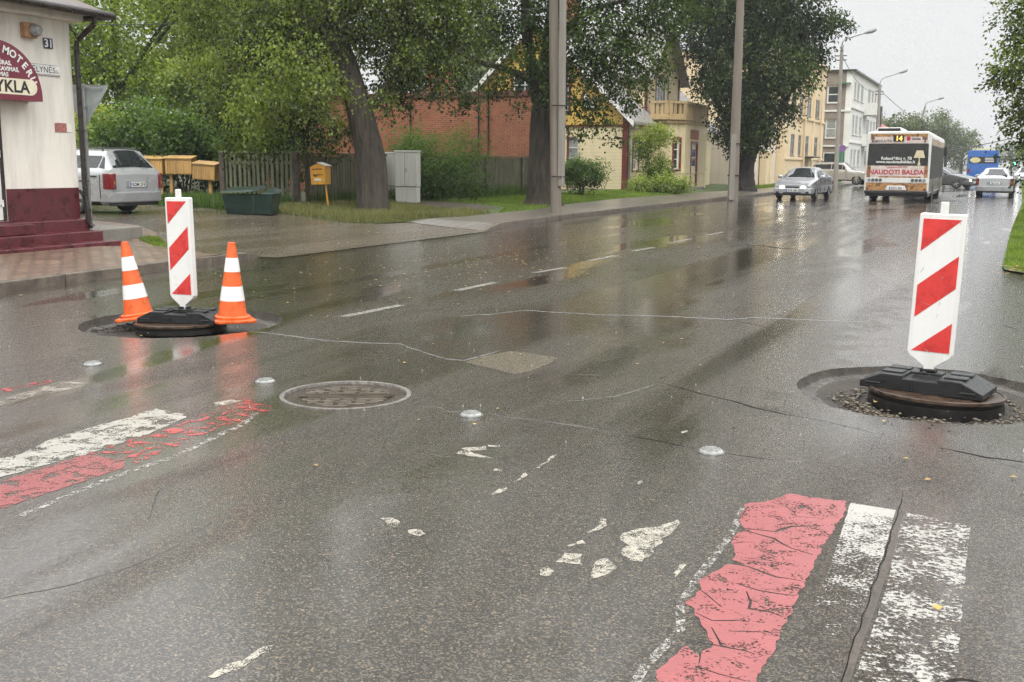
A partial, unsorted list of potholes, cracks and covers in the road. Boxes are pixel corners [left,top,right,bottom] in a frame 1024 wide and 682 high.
crack [557,373,1024,470]
manhole cover [867,386,1007,423]
crack [1,463,237,599]
manhole cover [134,322,227,337]
manhole cover [279,381,411,410]
